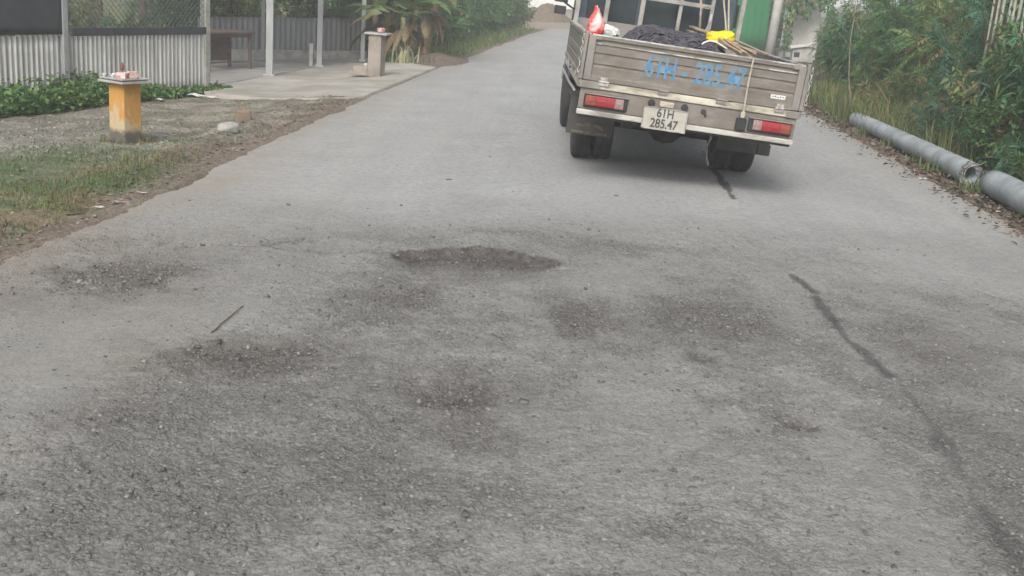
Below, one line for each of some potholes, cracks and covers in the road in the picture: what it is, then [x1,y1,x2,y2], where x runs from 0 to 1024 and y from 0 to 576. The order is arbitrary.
pothole [376,246,564,285]
